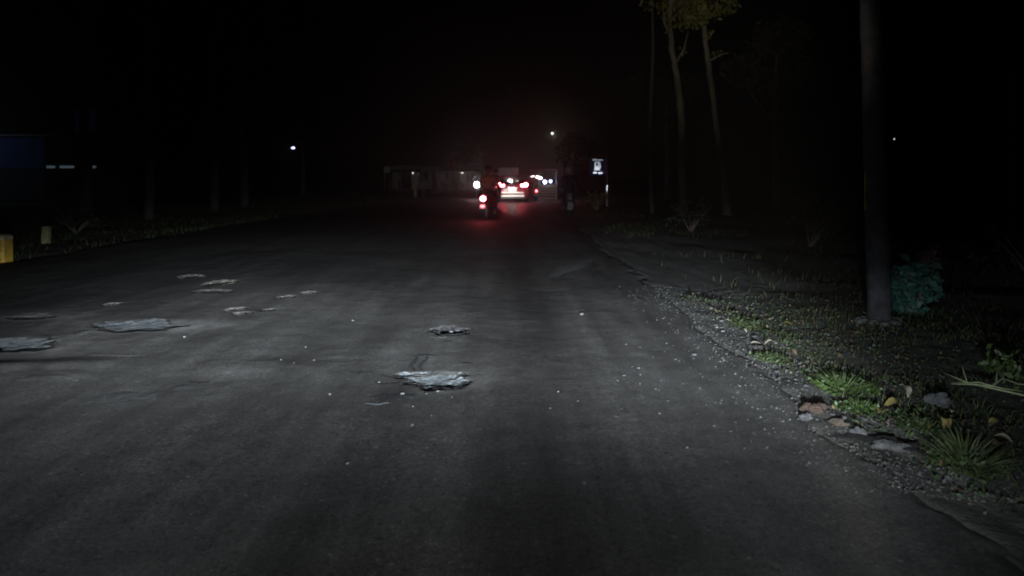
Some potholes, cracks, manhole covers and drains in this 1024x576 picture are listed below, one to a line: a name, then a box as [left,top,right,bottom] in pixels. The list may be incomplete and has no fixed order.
pothole [89,318,189,332]
pothole [0,336,55,352]
crack [349,336,453,405]
pothole [432,326,465,335]
pothole [403,370,472,390]
